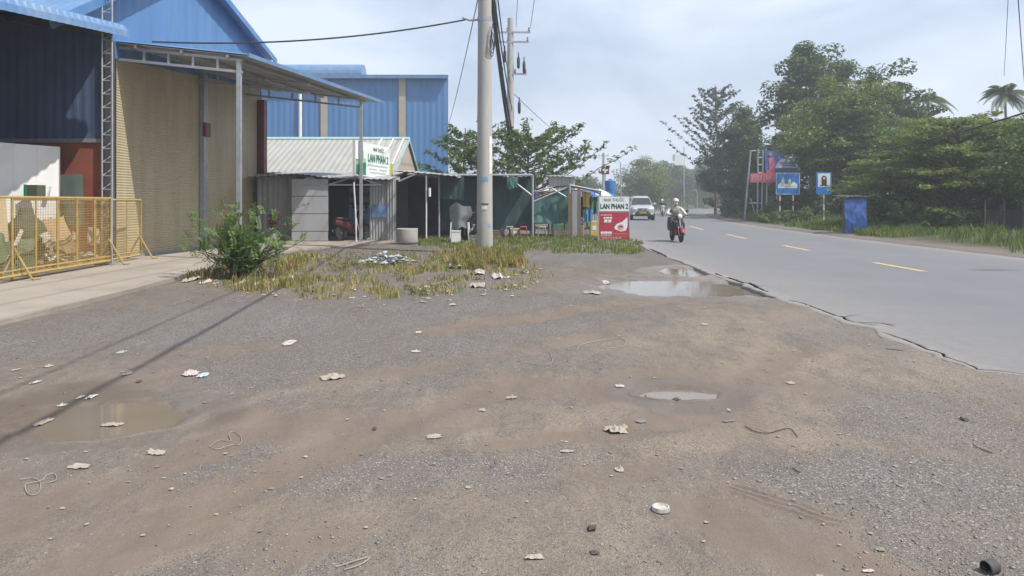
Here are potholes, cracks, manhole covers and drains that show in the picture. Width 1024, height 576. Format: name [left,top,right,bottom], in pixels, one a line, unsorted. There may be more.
pothole [569,266,769,300]
crack [790,300,1020,374]
pothole [0,396,210,444]
pothole [627,384,727,402]
